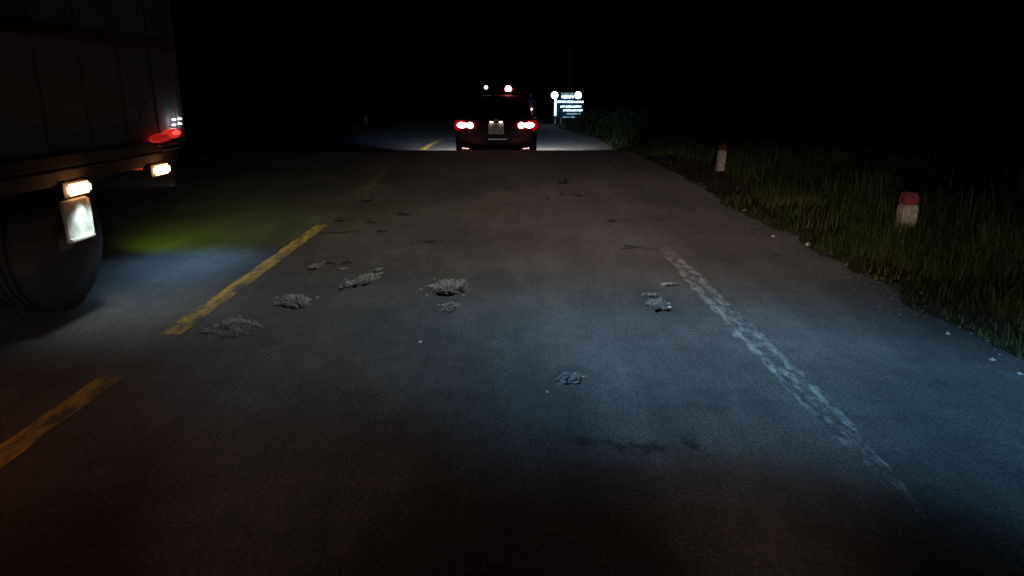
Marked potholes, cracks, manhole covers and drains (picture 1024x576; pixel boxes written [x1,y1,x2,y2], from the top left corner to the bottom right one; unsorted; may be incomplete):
pothole [336,269,384,291]
pothole [272,293,320,310]
pothole [645,297,677,313]
pothole [556,371,590,385]
pothole [419,277,470,296]
pothole [197,314,262,339]
pothole [437,301,462,313]
